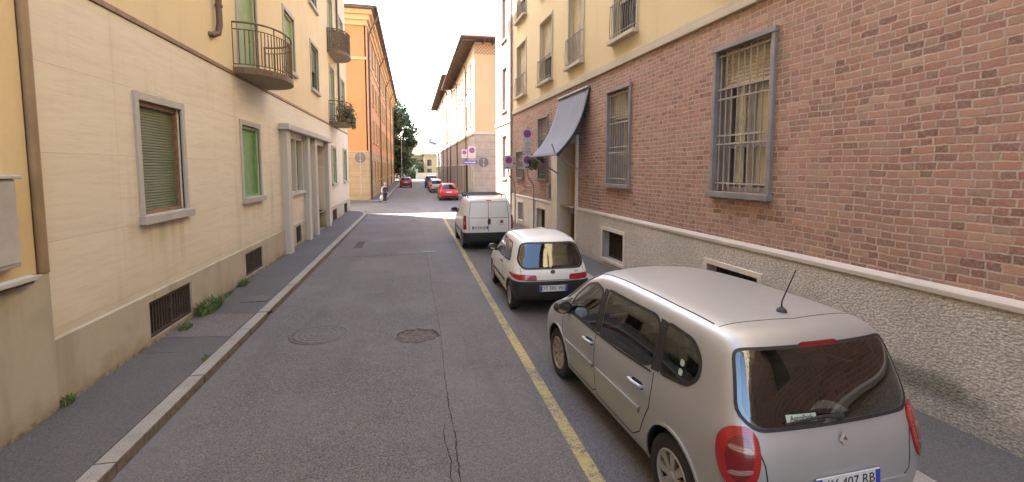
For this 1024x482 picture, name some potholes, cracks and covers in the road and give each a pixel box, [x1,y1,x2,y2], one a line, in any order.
crack [423,234,461,482]
manhole cover [288,324,350,345]
